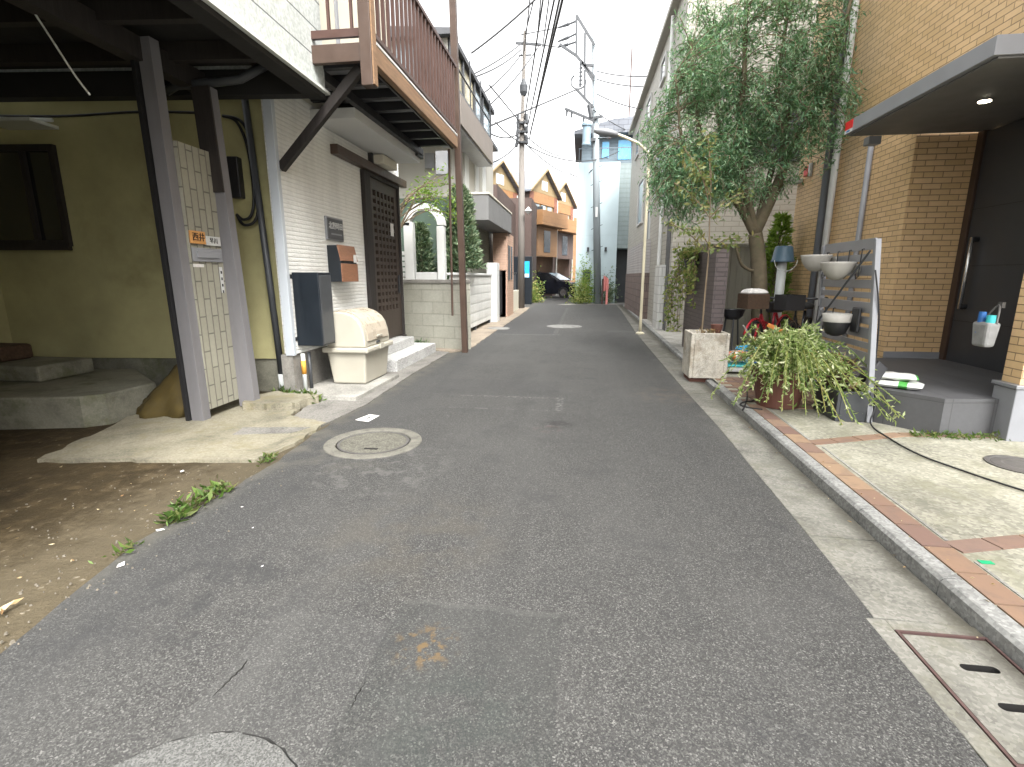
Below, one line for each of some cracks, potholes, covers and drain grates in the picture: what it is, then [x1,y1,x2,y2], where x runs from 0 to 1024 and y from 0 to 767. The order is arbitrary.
manhole cover [323,428,422,459]
crack [212,659,248,697]
manhole cover [984,455,1024,474]
